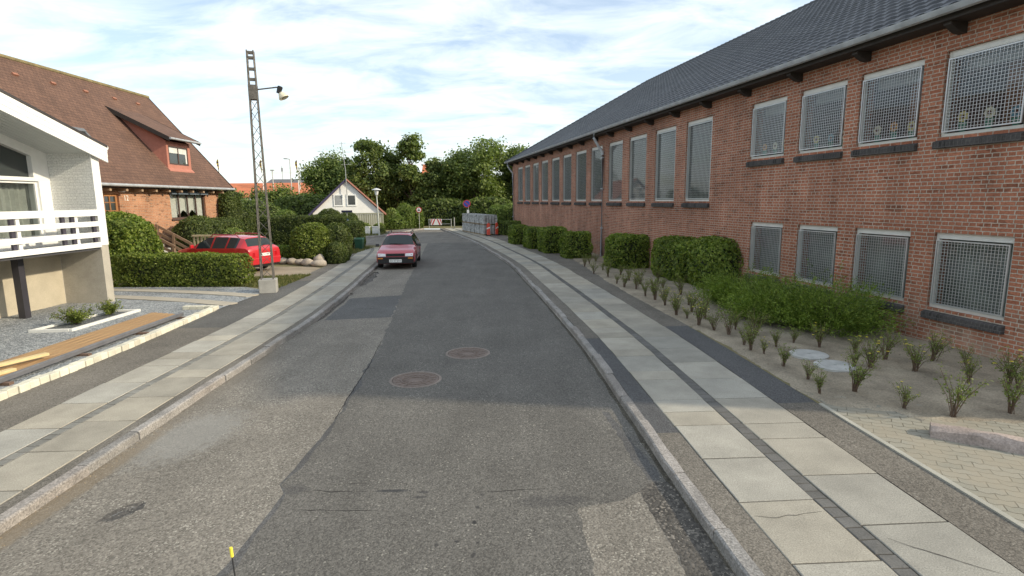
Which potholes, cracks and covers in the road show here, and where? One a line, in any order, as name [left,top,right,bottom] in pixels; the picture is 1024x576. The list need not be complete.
manhole cover [446,347,490,359]
manhole cover [389,371,442,388]
